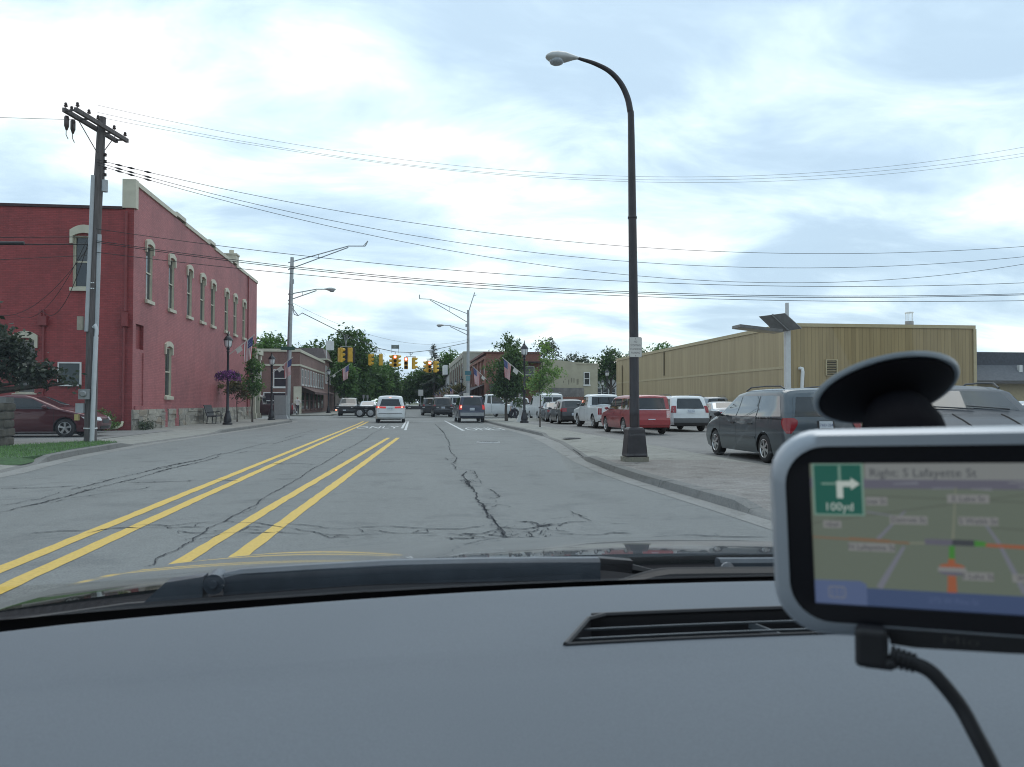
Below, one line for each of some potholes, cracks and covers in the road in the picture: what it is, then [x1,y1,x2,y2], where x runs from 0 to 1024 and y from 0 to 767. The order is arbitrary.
crack [24,424,756,567]
